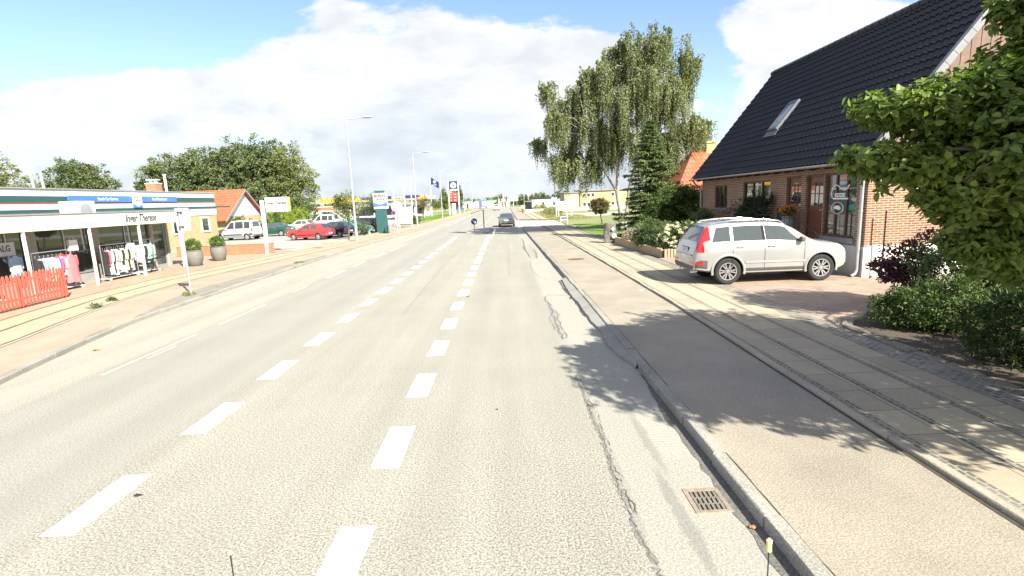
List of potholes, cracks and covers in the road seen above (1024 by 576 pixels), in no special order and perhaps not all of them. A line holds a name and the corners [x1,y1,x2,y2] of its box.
crack [575,376,665,576]
drain grate [682,487,734,514]
